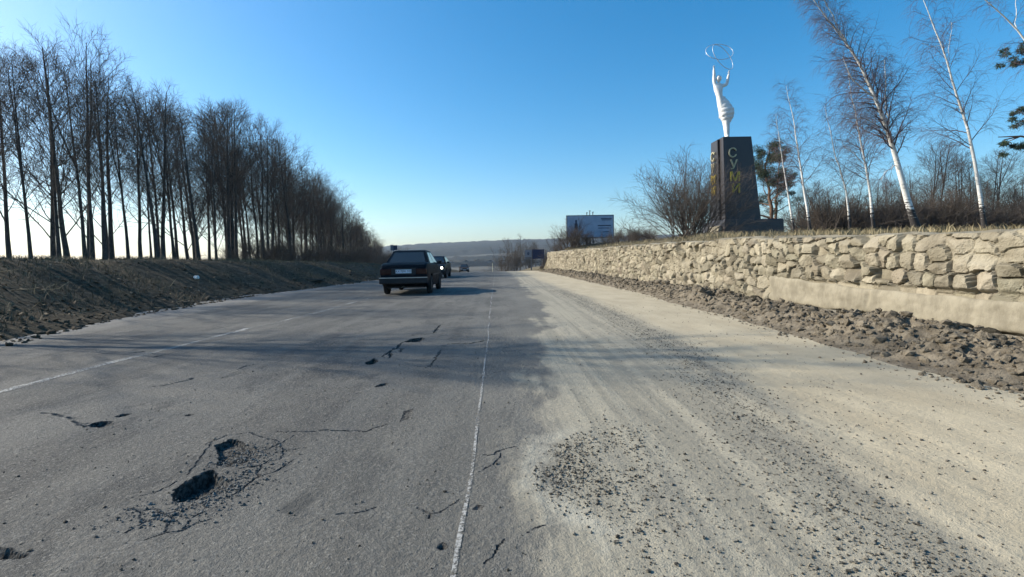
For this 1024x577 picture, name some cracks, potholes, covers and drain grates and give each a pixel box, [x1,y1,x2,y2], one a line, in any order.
crack [123,424,387,541]
crack [479,446,516,472]
crack [40,412,90,427]
crack [483,539,506,568]
pothole [171,469,231,503]
crack [416,498,461,519]
pothole [0,547,30,561]
pothole [213,439,260,468]
crack [381,325,484,367]
